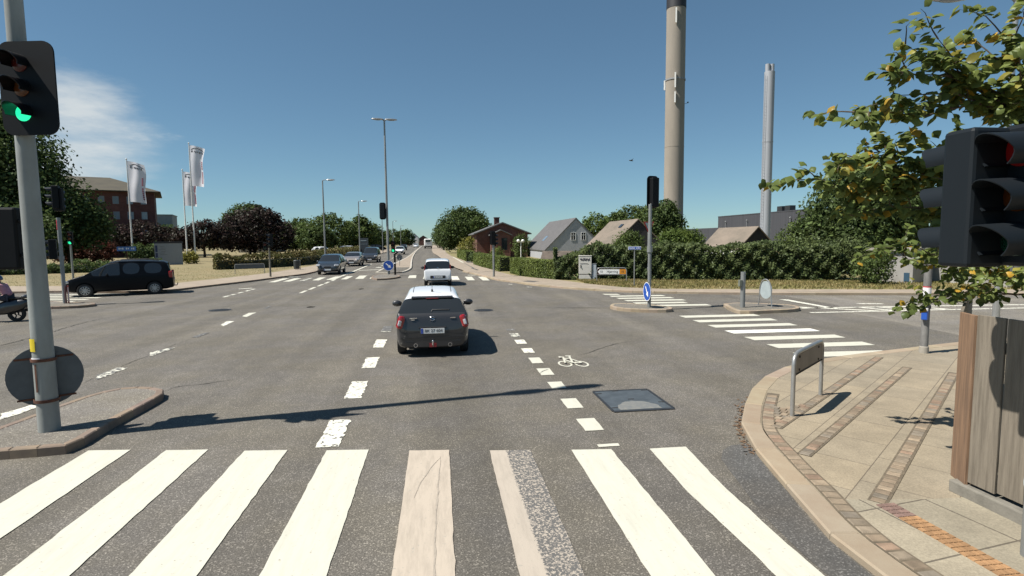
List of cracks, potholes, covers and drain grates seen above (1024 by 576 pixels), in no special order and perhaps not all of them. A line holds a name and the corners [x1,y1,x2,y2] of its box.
utility cover [592,388,675,413]
